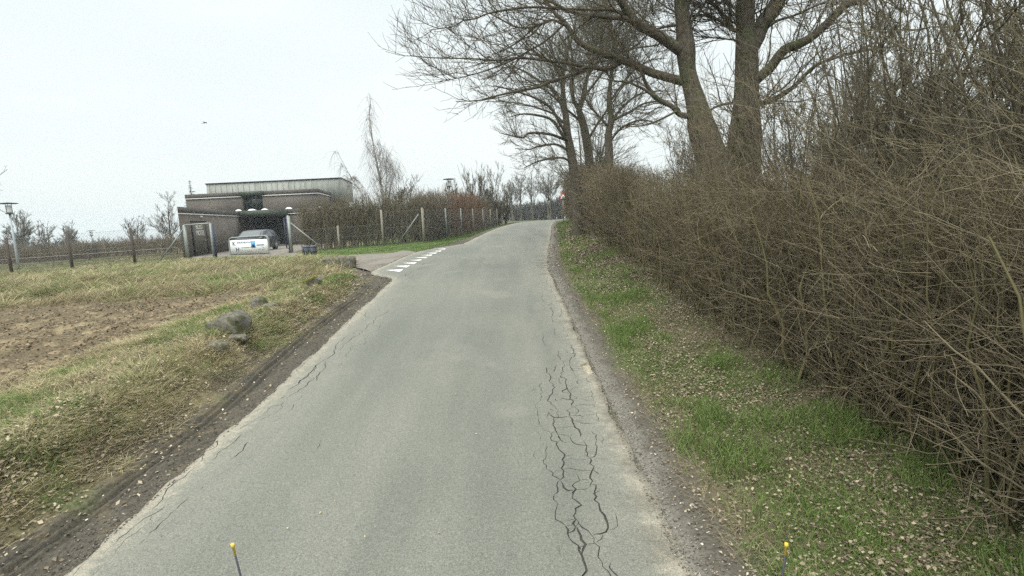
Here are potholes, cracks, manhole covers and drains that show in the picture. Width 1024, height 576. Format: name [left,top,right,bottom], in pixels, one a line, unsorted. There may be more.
crack [104,305,388,553]
crack [532,271,618,576]
